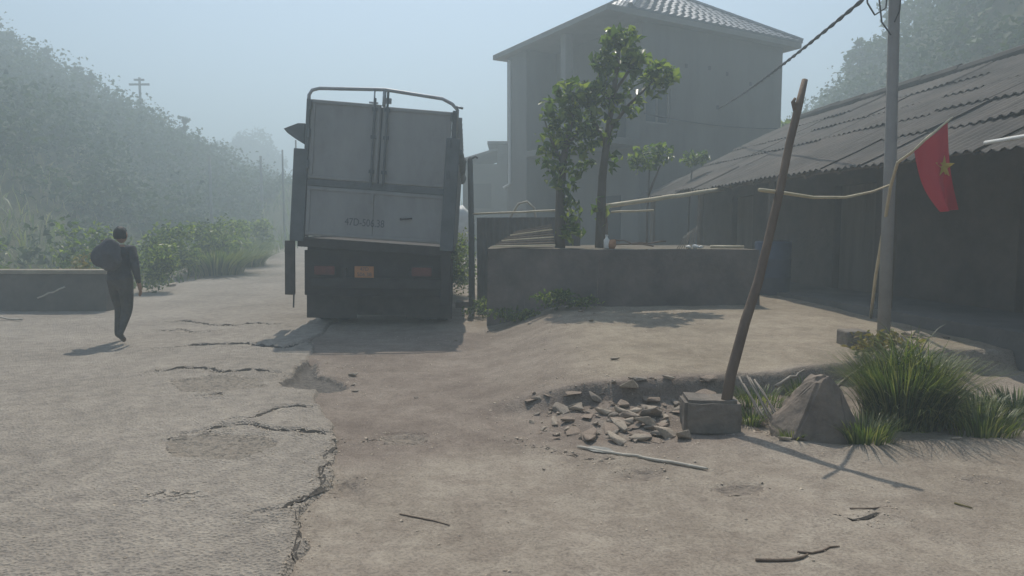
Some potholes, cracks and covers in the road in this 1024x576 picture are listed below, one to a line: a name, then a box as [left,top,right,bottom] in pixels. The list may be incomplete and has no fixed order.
crack [204,405,337,564]
crack [162,320,296,348]
pothole [280,360,349,393]
